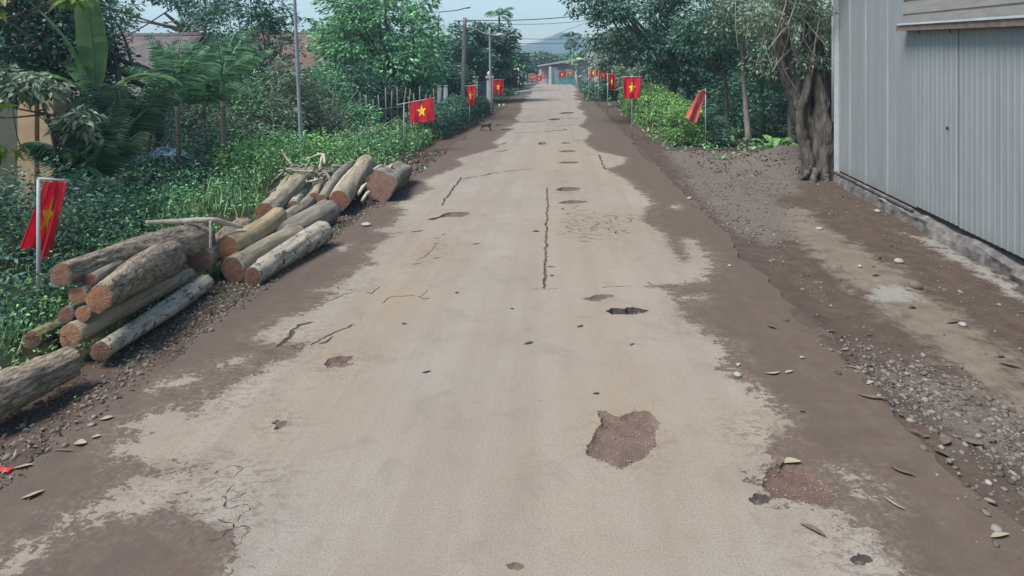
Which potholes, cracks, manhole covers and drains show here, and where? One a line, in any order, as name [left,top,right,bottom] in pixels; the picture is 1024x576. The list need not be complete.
pothole [584,409,666,470]
crack [202,463,251,547]
pothole [582,294,615,302]
pothole [506,562,525,571]
crack [542,187,642,289]
pothole [323,356,356,370]
pothole [850,553,873,566]
pothole [427,212,469,220]
pothole [761,463,837,509]
pothole [606,306,649,316]
crack [441,169,528,206]
crack [497,118,605,169]
